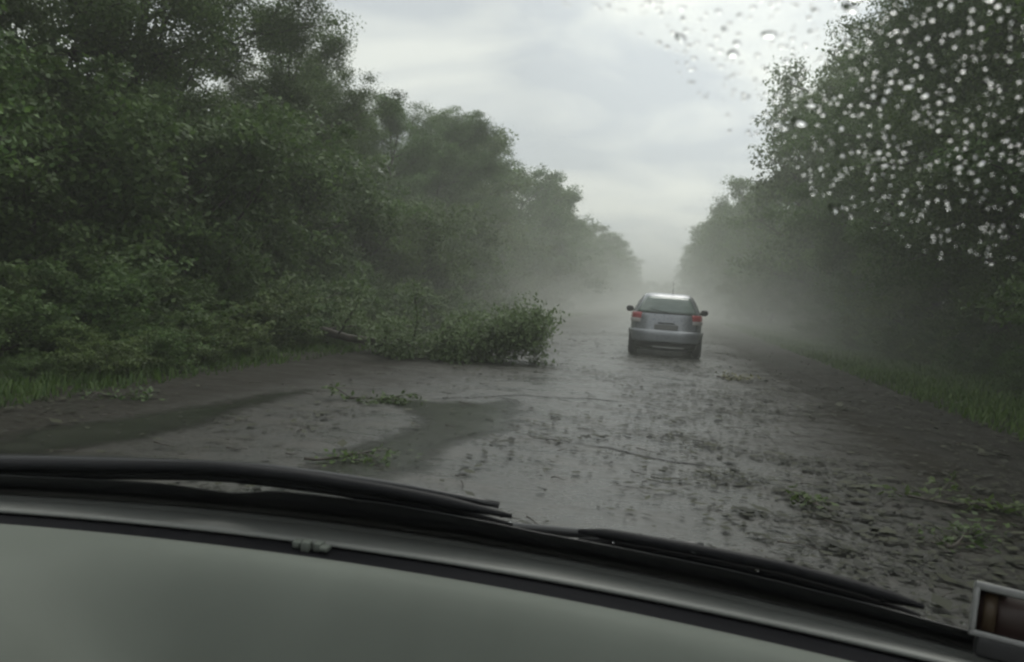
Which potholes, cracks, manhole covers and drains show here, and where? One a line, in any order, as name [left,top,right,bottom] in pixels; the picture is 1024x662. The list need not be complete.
crack [584,444,724,467]
